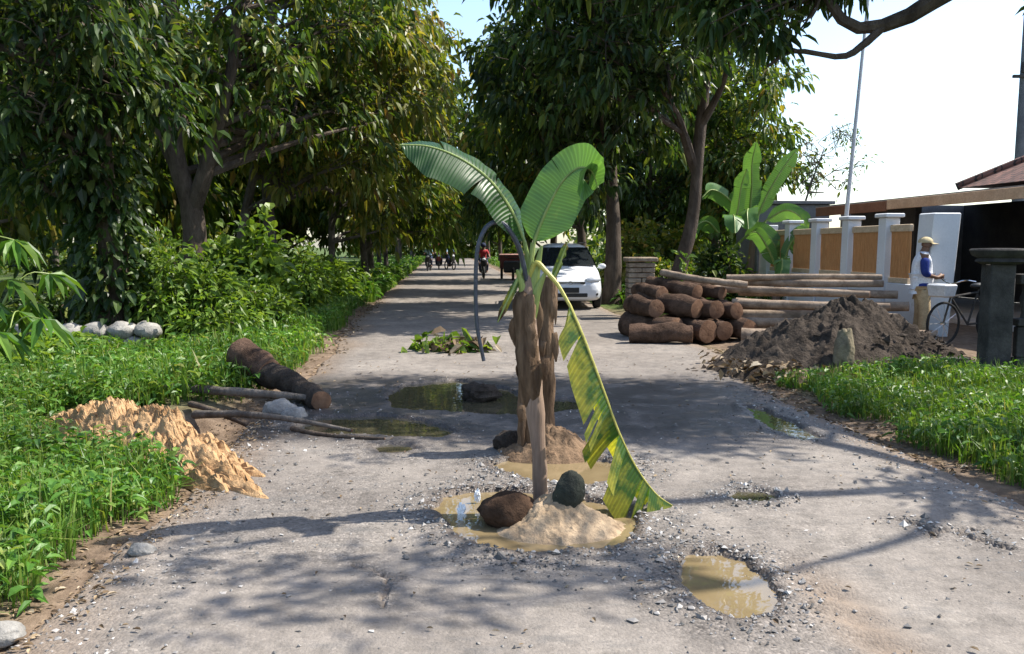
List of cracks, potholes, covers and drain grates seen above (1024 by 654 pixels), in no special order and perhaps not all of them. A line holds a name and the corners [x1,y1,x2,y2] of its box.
pothole [734,402,832,440]
pothole [378,378,578,415]
pothole [364,440,426,454]
pothole [483,454,640,485]
pothole [667,543,792,620]
pothole [289,412,463,438]
pothole [718,484,793,503]
pothole [421,483,647,554]
crack [349,562,408,608]
